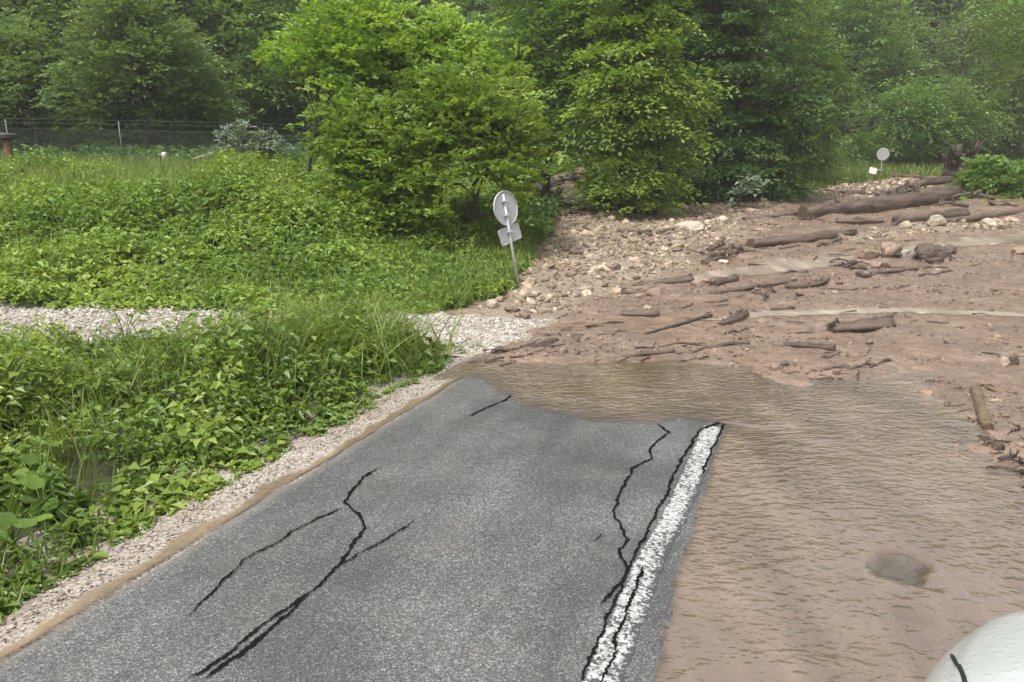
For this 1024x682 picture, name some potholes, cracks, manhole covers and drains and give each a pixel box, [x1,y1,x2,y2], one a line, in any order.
crack [581,422,725,682]
pothole [878,553,927,586]
crack [187,468,414,679]
